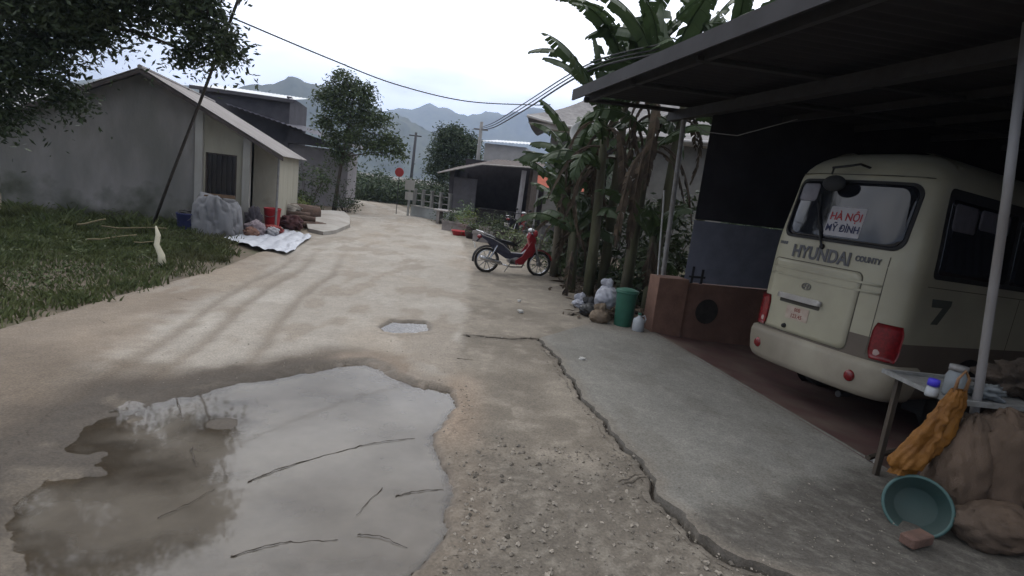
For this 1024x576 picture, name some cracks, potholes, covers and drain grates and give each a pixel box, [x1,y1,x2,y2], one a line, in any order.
crack [467,334,764,576]
